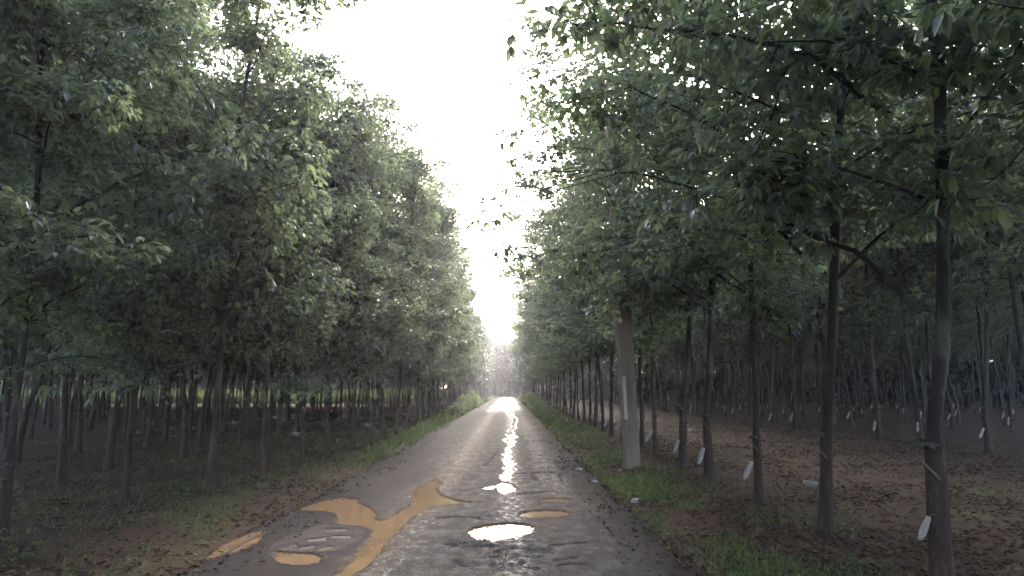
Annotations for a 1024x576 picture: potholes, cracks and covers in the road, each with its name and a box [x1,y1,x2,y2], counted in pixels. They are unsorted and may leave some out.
pothole [461,521,539,542]
pothole [495,481,519,494]
crack [454,541,552,567]
pothole [515,509,573,518]
